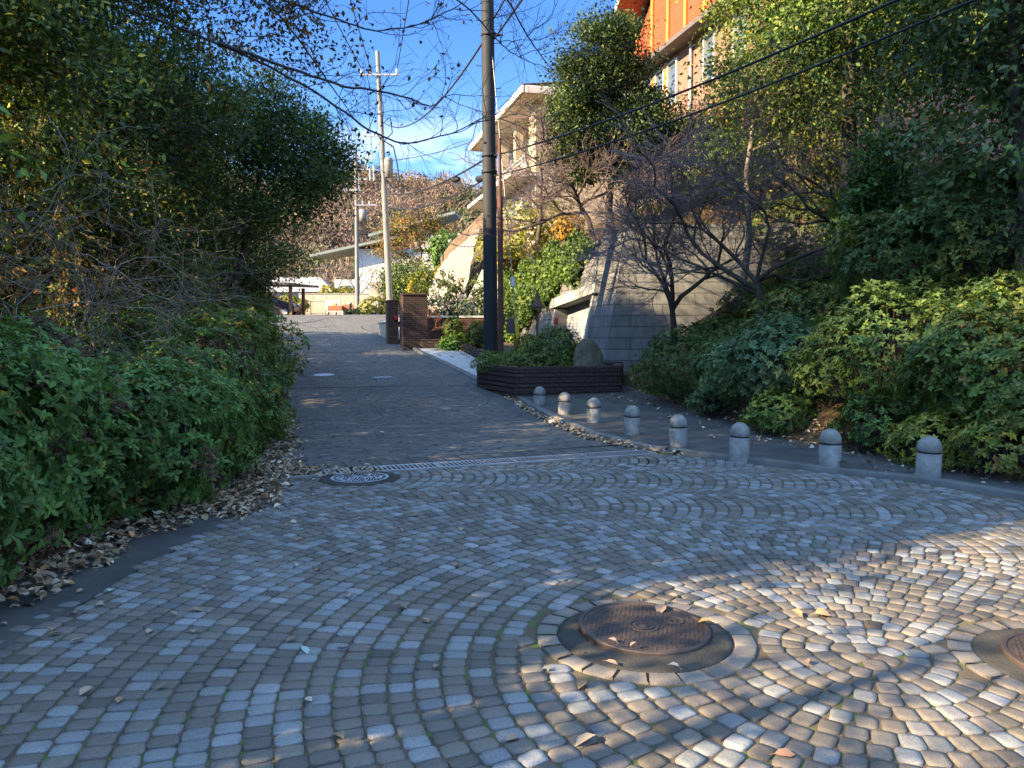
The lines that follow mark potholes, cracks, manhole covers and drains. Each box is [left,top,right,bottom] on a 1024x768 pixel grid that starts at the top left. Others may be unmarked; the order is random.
manhole cover [557,601,735,674]
drain grate [264,450,658,479]
manhole cover [319,471,400,487]
manhole cover [972,628,1024,683]
